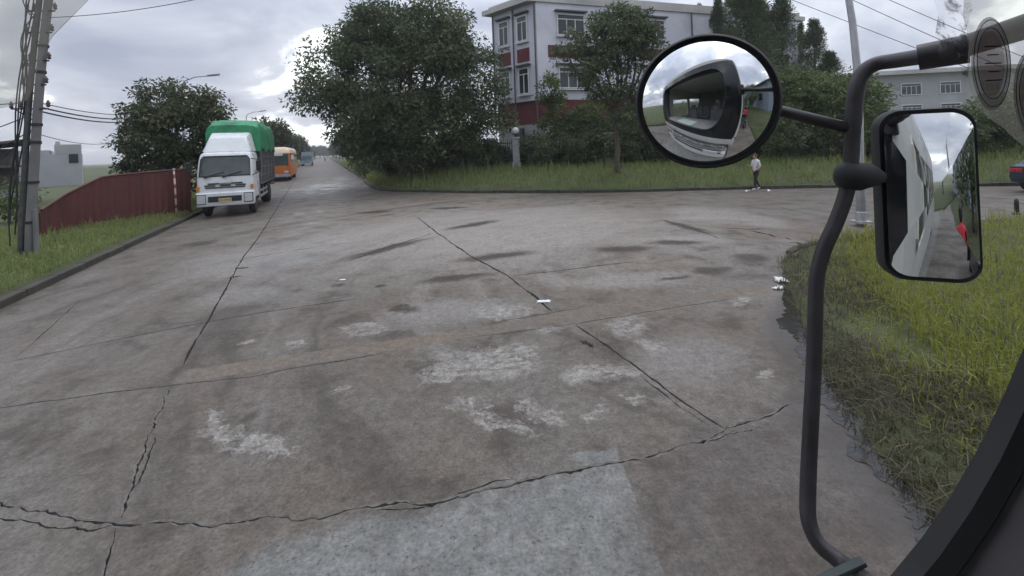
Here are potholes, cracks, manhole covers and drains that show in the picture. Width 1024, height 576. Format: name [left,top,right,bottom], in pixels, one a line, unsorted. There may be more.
crack [0,402,801,532]
